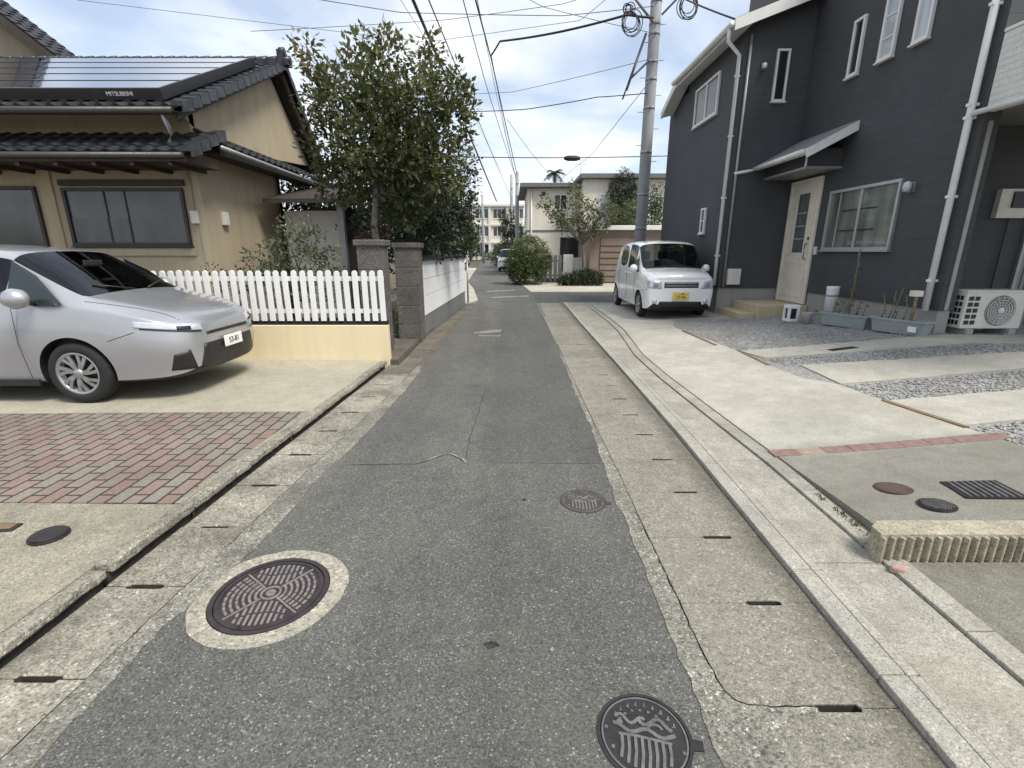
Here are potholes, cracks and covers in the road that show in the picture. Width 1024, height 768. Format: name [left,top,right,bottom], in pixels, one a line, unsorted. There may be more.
crack [357,389,486,465]
drain grate [939,480,1024,500]
crack [588,411,815,708]
manhole cover [917,498,959,512]
manhole cover [873,482,914,495]
manhole cover [560,489,611,513]
manhole cover [26,525,71,546]
manhole cover [186,550,349,650]
manhole cover [597,693,704,768]
